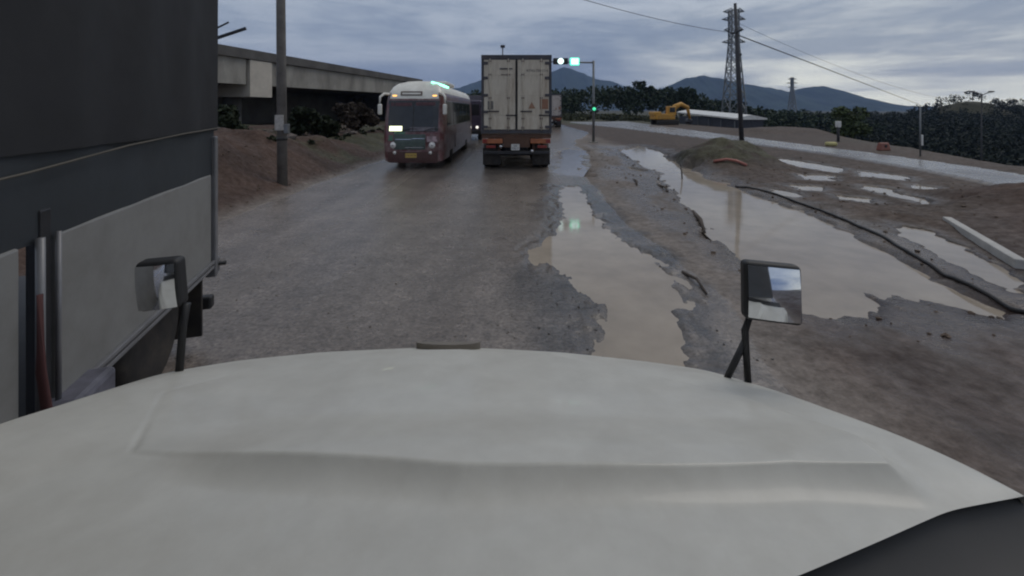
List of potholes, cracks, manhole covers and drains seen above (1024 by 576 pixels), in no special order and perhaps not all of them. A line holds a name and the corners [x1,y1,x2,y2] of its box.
pothole [515,184,715,373]
